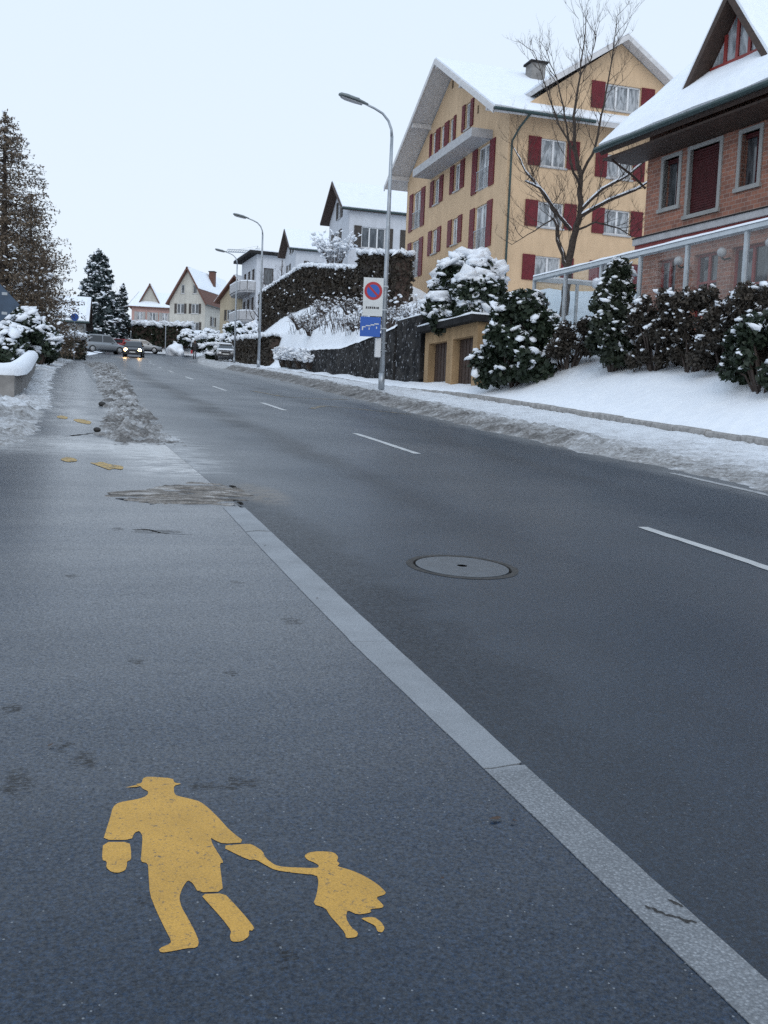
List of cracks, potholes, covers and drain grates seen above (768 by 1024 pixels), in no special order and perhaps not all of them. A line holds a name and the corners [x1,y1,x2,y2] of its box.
manhole cover [406,555,519,579]
crack [645,899,697,923]
